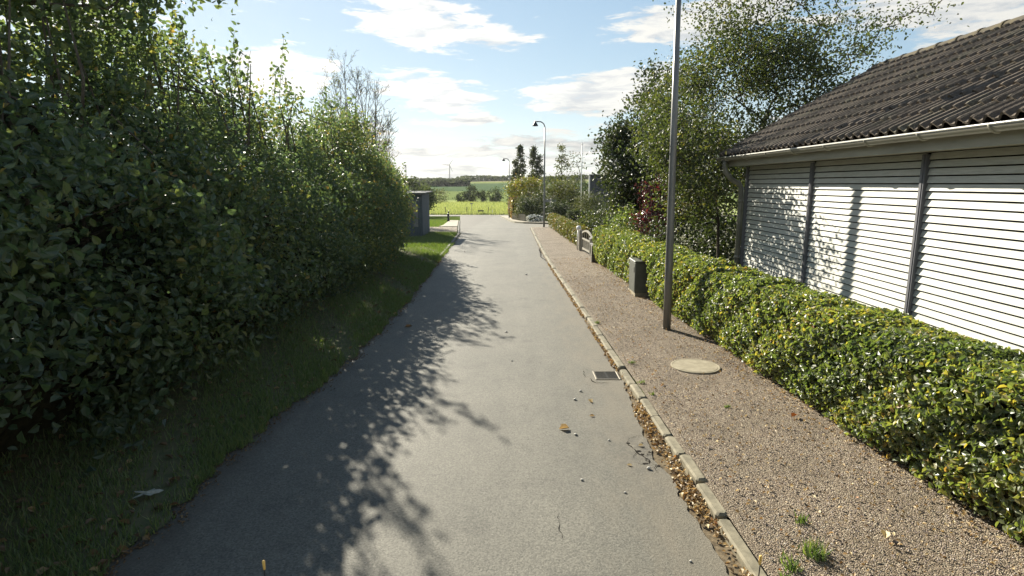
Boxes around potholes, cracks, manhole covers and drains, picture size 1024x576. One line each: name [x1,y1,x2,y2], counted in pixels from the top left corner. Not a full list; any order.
drain grate [592,371,621,380]
crack [627,435,662,470]
manhole cover [670,359,721,374]
